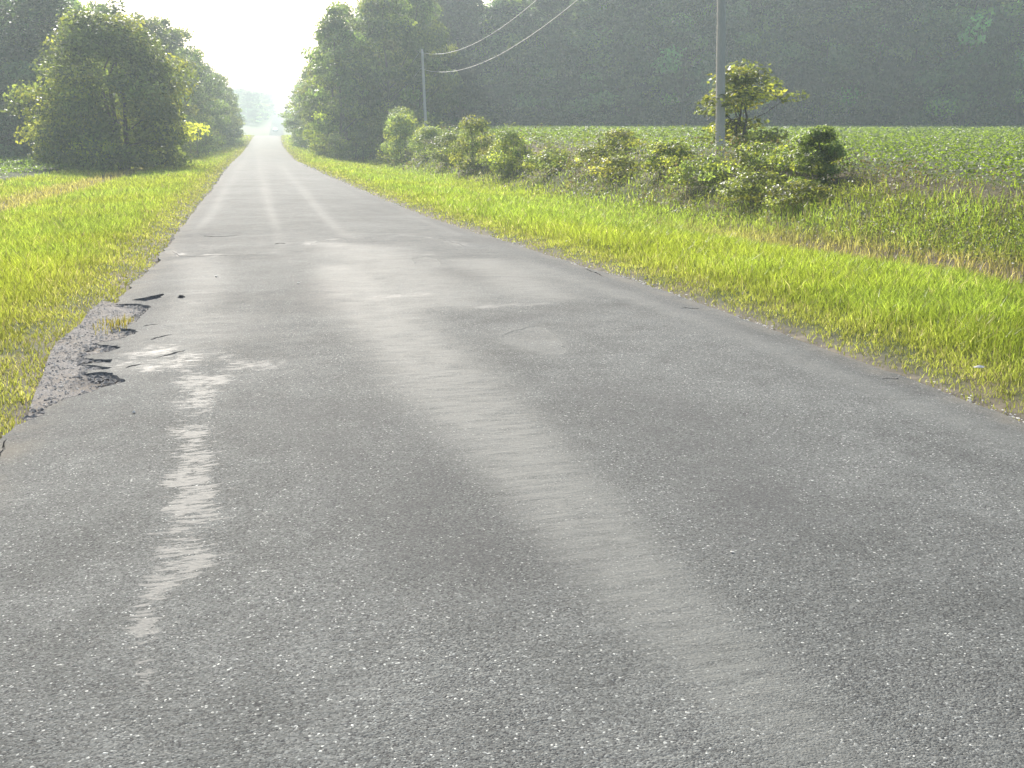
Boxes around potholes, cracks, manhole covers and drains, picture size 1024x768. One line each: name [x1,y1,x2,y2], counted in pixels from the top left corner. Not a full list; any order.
pothole [22,300,150,422]
pothole [133,293,164,301]
